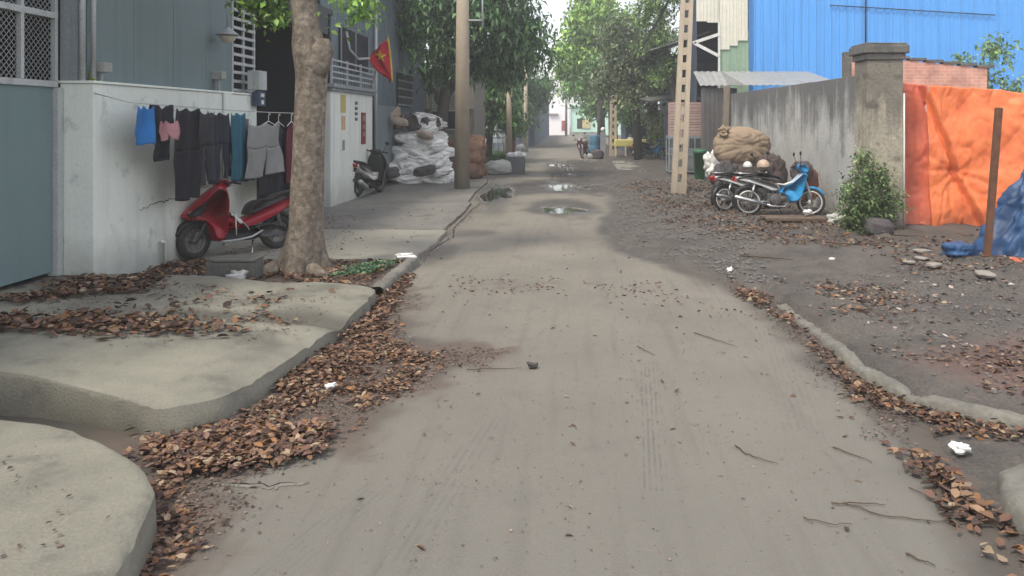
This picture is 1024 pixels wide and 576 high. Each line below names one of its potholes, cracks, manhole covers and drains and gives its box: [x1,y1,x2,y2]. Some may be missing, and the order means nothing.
pothole [539,206,590,214]
pothole [477,182,515,204]
pothole [547,183,577,191]
